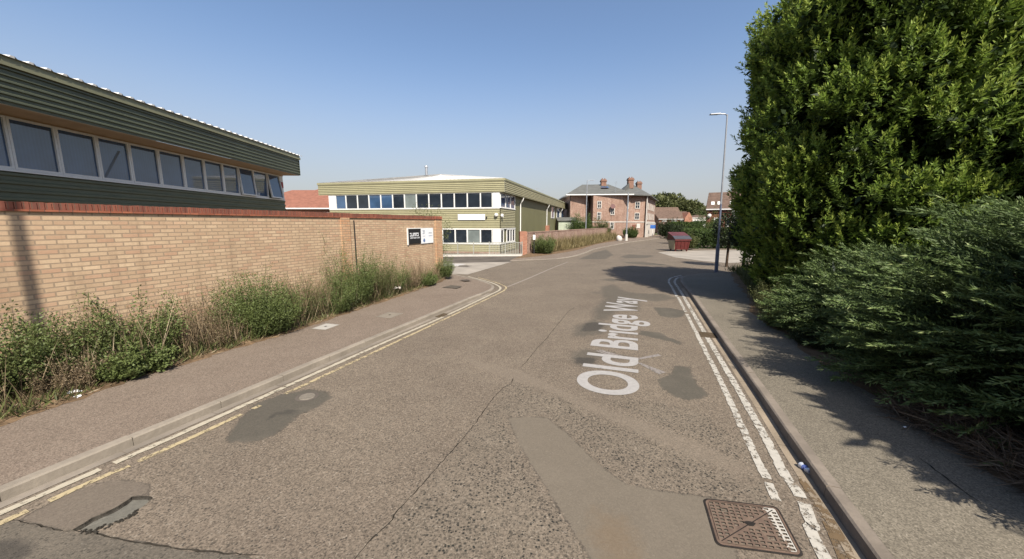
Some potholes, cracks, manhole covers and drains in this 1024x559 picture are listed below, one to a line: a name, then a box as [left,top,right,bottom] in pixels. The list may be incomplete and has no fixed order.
crack [355,309,572,559]
manhole cover [703,498,803,557]
utility cover [295,392,319,402]
crack [0,519,259,555]
pothole [73,496,153,535]
